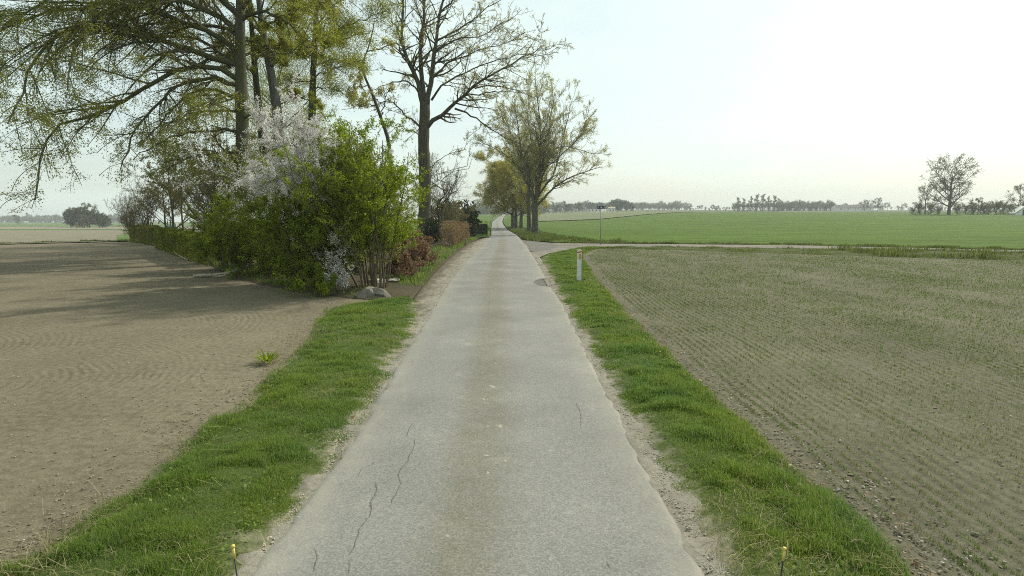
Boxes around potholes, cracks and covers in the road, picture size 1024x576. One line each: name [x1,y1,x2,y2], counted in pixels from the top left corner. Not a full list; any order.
crack [348,432,415,572]
